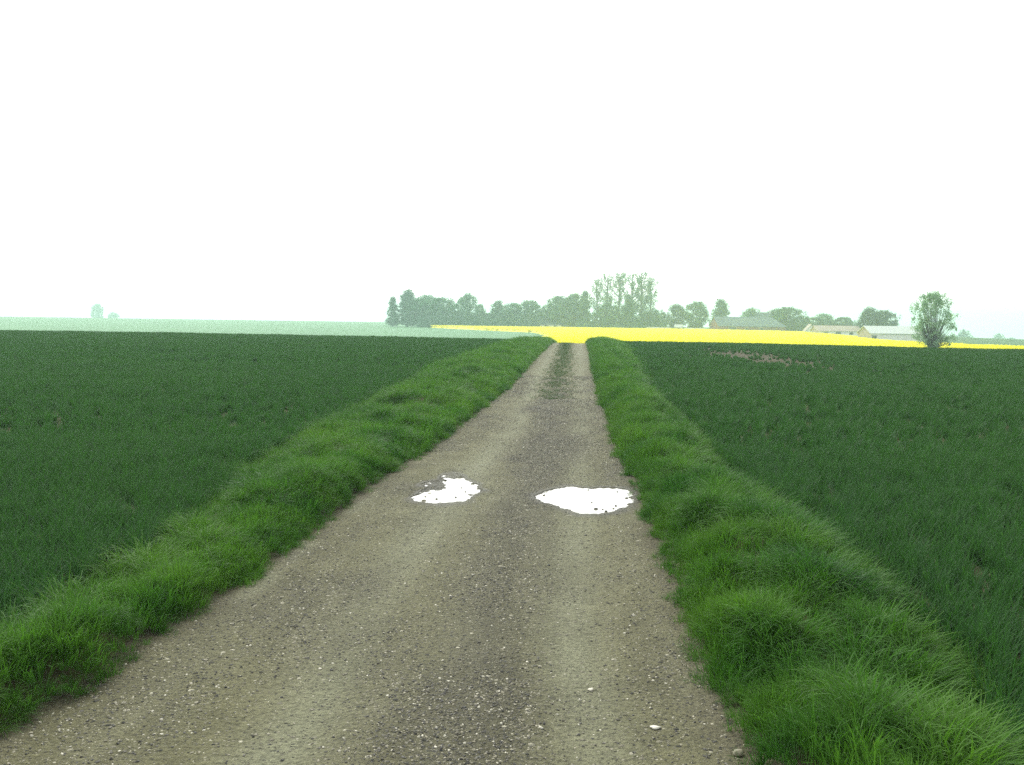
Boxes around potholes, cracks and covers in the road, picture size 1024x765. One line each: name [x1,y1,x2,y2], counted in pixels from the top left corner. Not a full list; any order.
pothole [529,485,640,516]
pothole [405,472,486,506]
